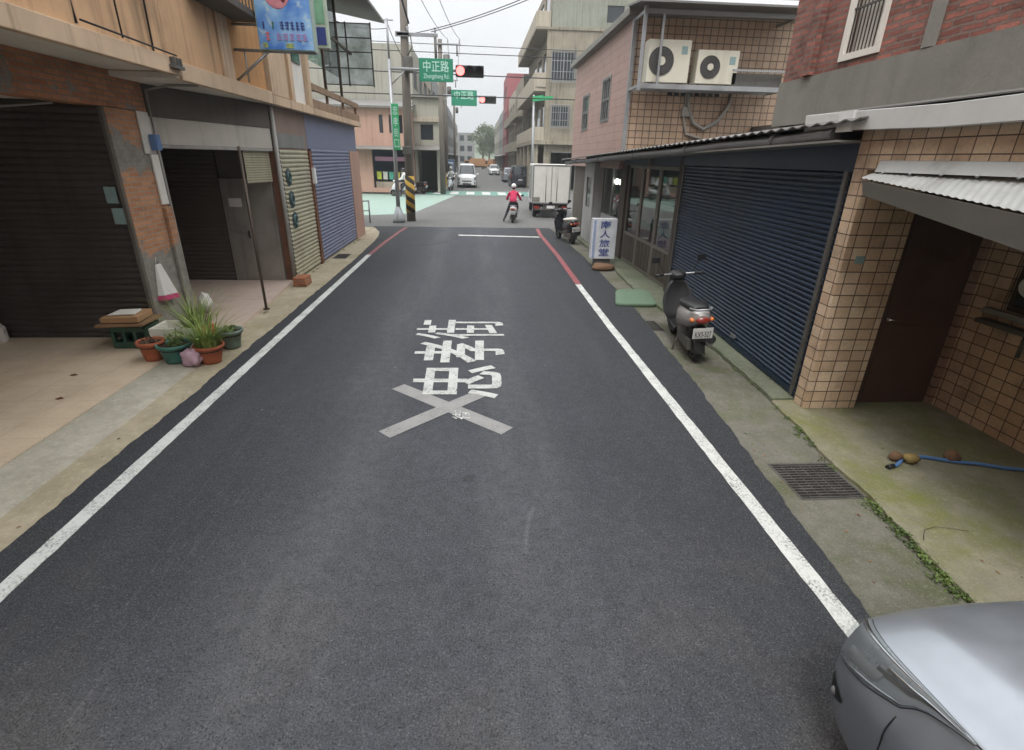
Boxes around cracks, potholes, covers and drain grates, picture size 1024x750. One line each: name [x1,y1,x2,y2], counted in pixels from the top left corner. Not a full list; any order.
drain grate [645,321,666,331]
drain grate [768,463,867,500]
